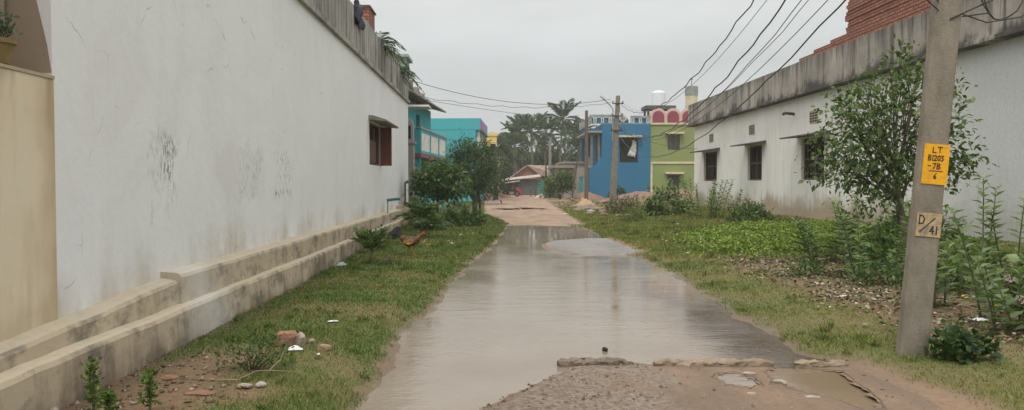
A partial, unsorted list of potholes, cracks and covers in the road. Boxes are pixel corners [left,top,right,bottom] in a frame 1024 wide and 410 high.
pothole [711,371,765,389]
pothole [764,367,887,410]
